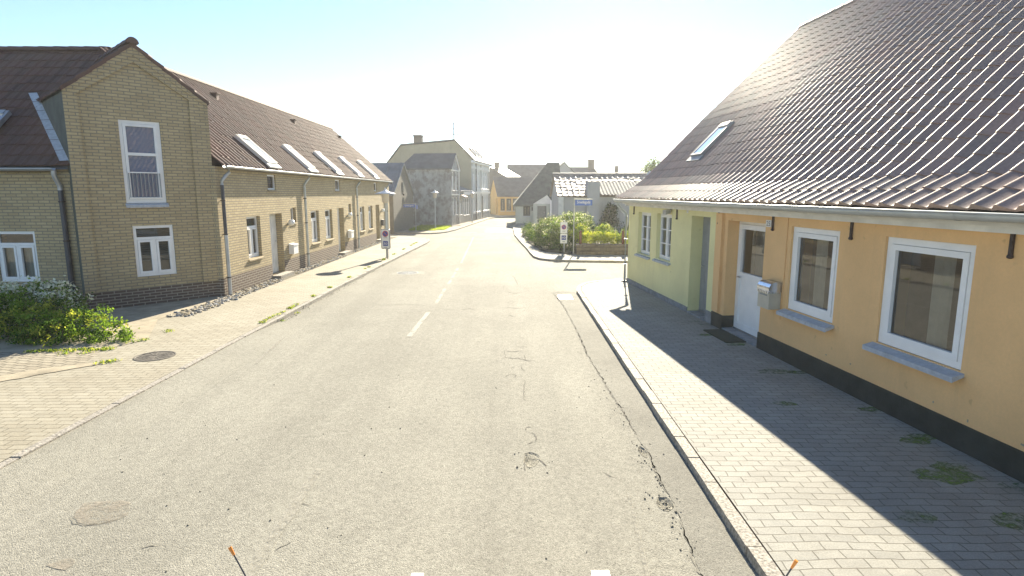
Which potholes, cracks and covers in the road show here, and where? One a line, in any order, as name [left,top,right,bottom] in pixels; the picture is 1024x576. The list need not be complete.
crack [503,346,533,401]
manhole cover [133,351,176,362]
pothole [644,494,681,513]
pothole [514,452,553,468]
